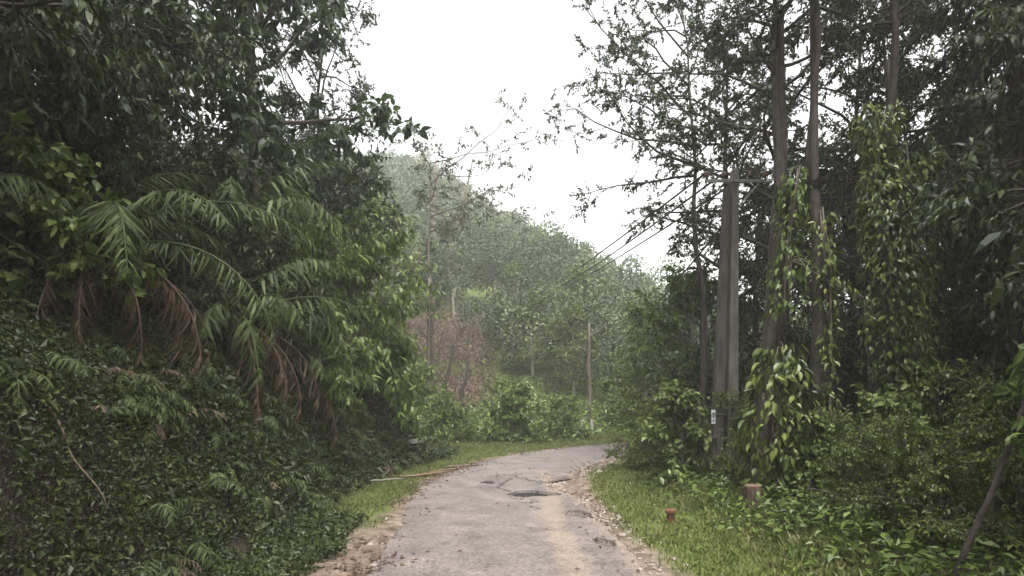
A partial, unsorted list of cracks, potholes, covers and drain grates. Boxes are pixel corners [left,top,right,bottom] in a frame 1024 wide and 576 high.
pothole [563,509,595,519]
crack [487,458,548,509]
pothole [590,538,620,550]
pothole [501,490,566,498]
